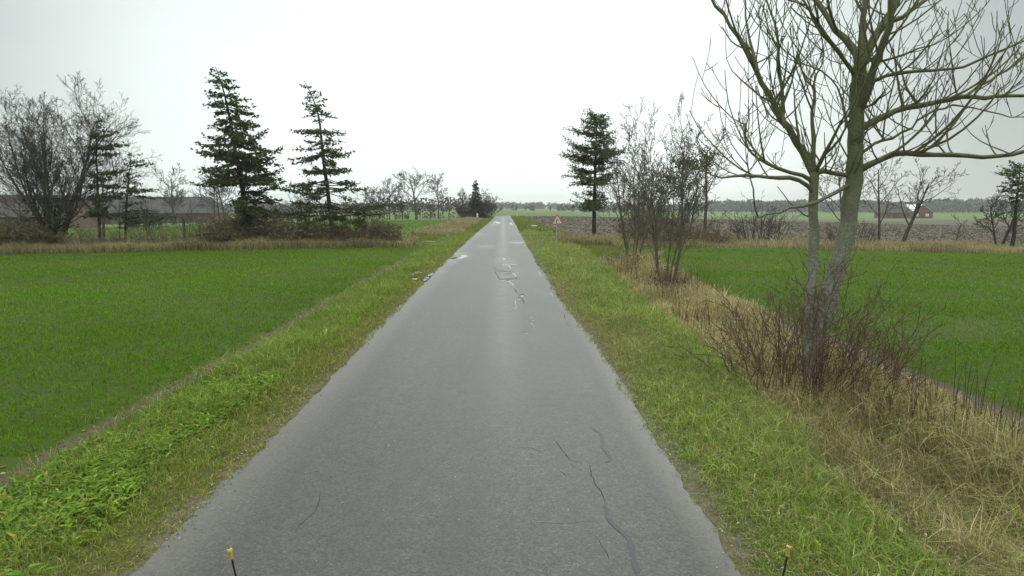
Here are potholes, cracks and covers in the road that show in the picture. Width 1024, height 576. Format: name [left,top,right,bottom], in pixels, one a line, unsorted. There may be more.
crack [495,264,524,310]
